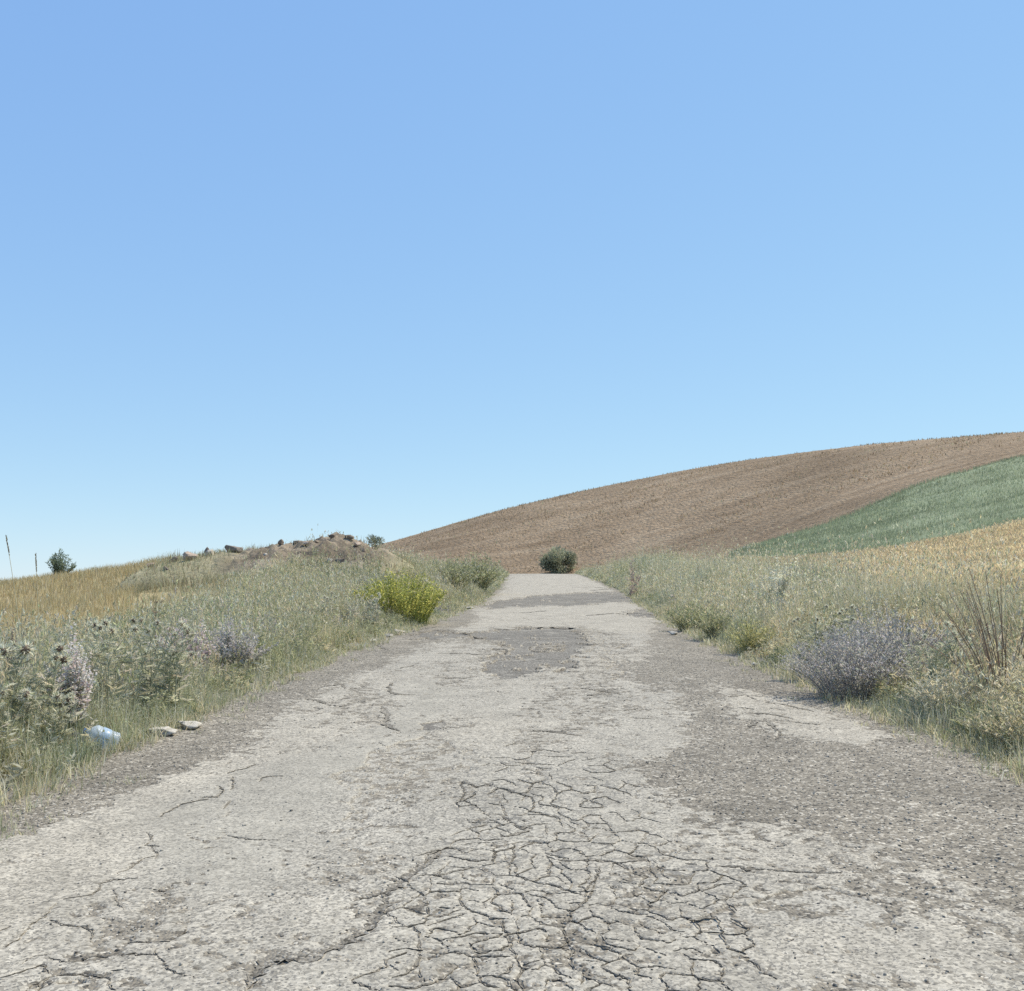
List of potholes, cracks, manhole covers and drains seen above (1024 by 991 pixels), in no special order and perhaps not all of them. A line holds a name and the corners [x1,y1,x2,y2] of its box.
crack [351,715,842,991]
crack [0,764,283,991]
crack [308,665,413,746]
